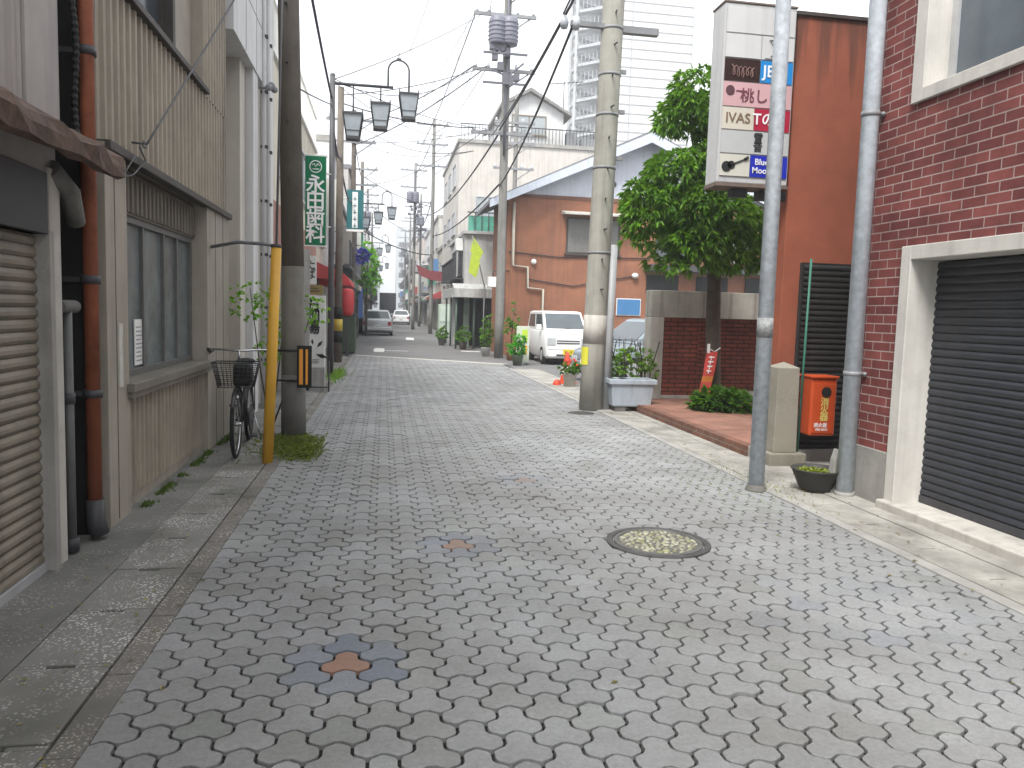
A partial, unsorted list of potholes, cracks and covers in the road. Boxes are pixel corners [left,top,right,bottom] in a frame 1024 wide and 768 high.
manhole cover [606,527,711,559]
